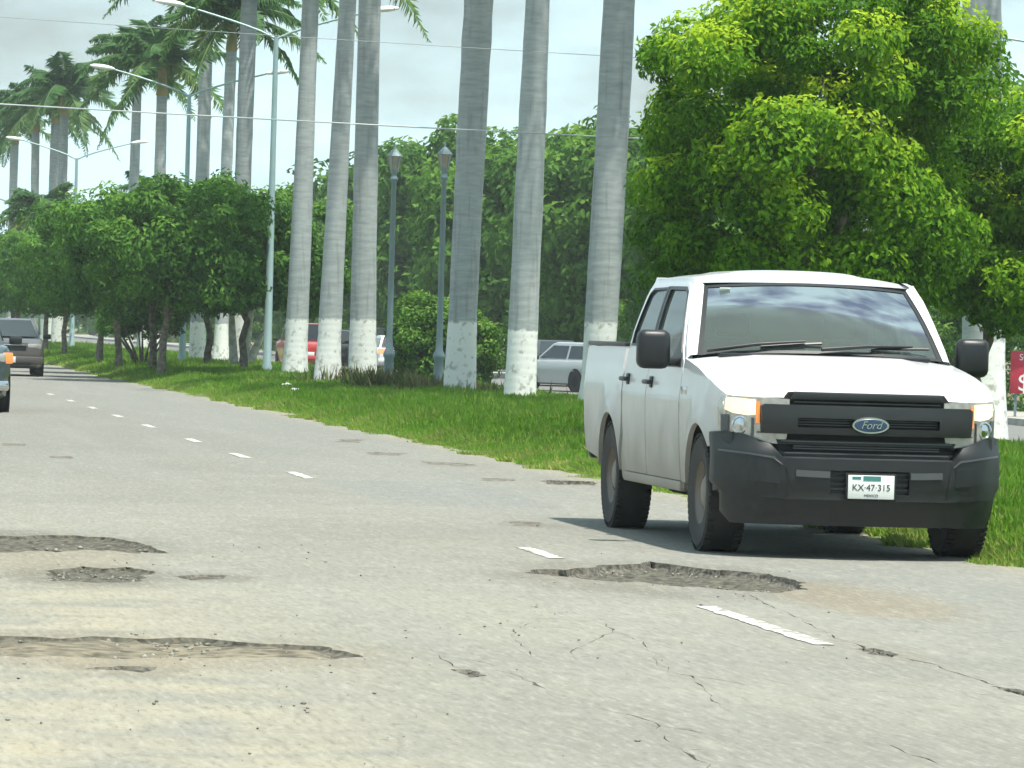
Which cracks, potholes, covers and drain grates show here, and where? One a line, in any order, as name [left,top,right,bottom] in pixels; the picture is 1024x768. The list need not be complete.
pothole [451,669,487,678]
pothole [0,535,167,554]
pothole [0,636,363,660]
crack [744,593,997,686]
pothole [46,566,155,583]
crack [511,604,742,703]
pothole [525,561,808,593]
crack [427,647,719,768]
